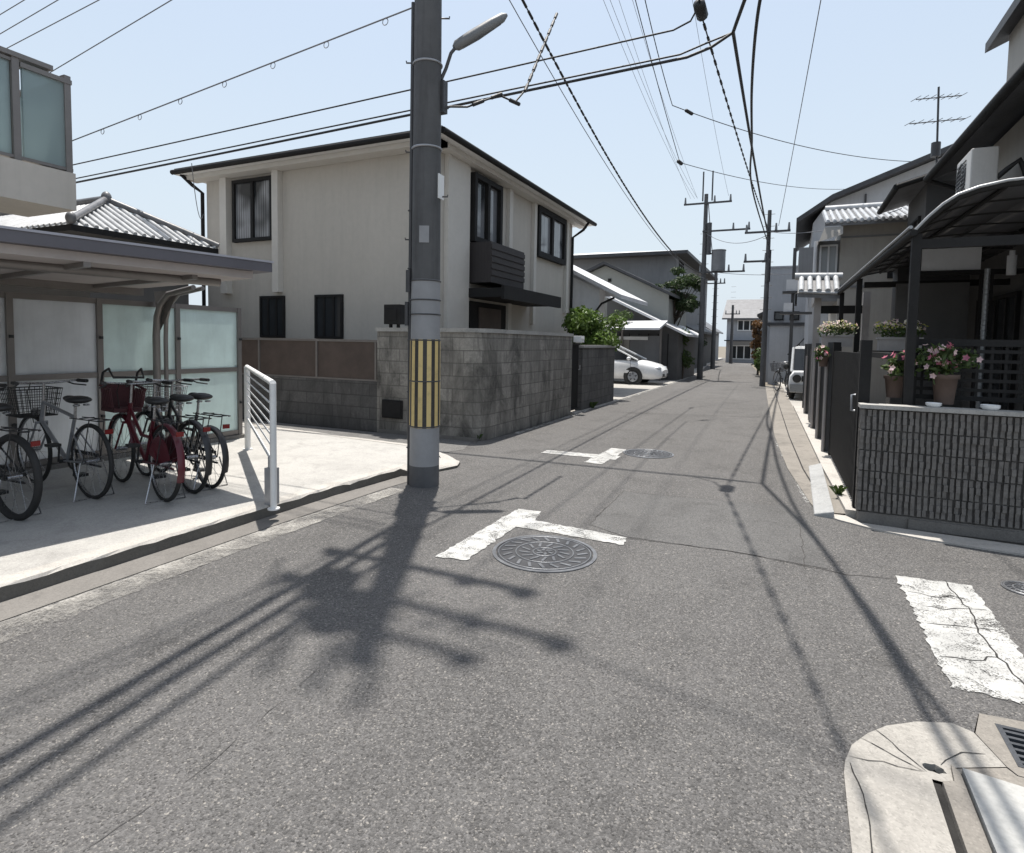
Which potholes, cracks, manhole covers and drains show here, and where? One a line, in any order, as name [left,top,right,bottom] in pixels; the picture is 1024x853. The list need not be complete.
manhole cover [623,449,674,459]
manhole cover [492,535,597,573]
drain grate [995,723,1024,768]
manhole cover [1000,580,1024,596]
